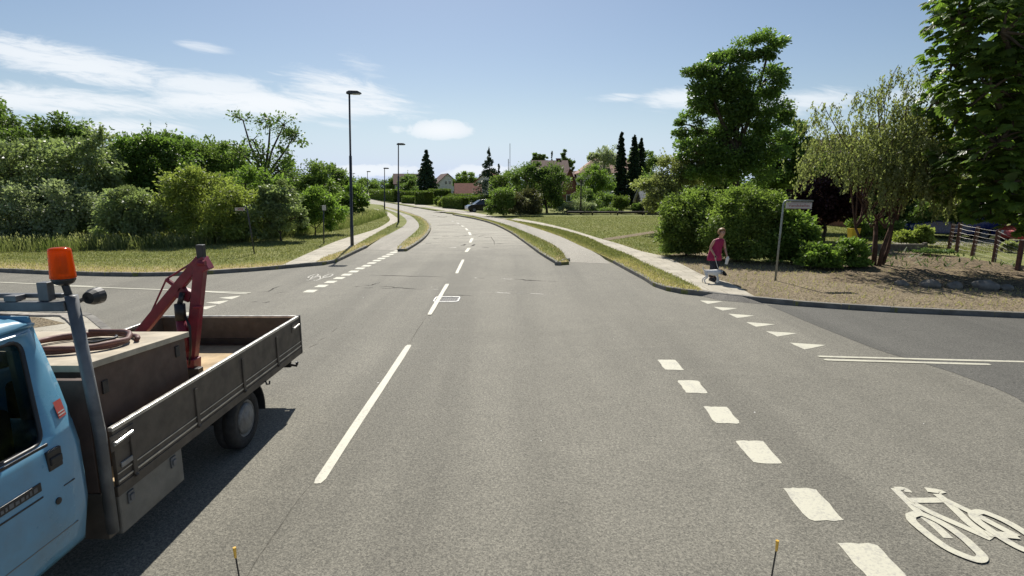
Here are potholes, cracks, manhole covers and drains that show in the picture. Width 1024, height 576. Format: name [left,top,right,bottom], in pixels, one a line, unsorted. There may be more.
crack [356,275,536,294]
